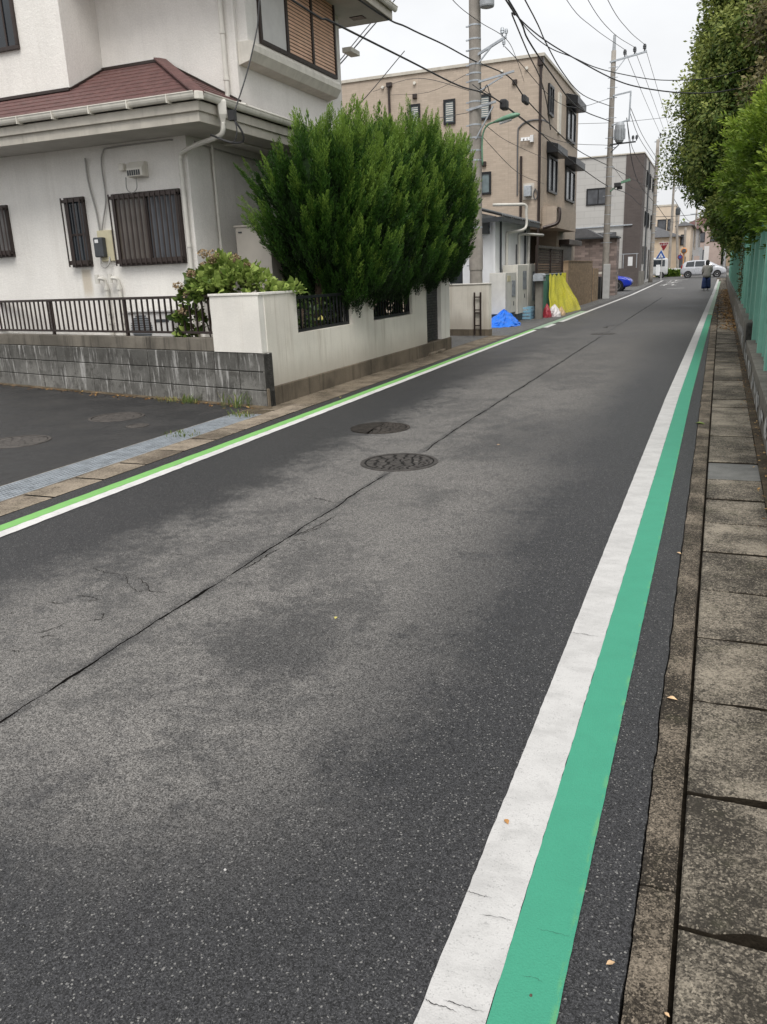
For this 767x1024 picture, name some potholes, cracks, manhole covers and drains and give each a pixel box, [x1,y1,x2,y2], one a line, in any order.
manhole cover [0,435,52,449]
manhole cover [88,412,145,422]
manhole cover [350,422,410,434]
crack [0,474,387,723]
manhole cover [360,453,438,472]
